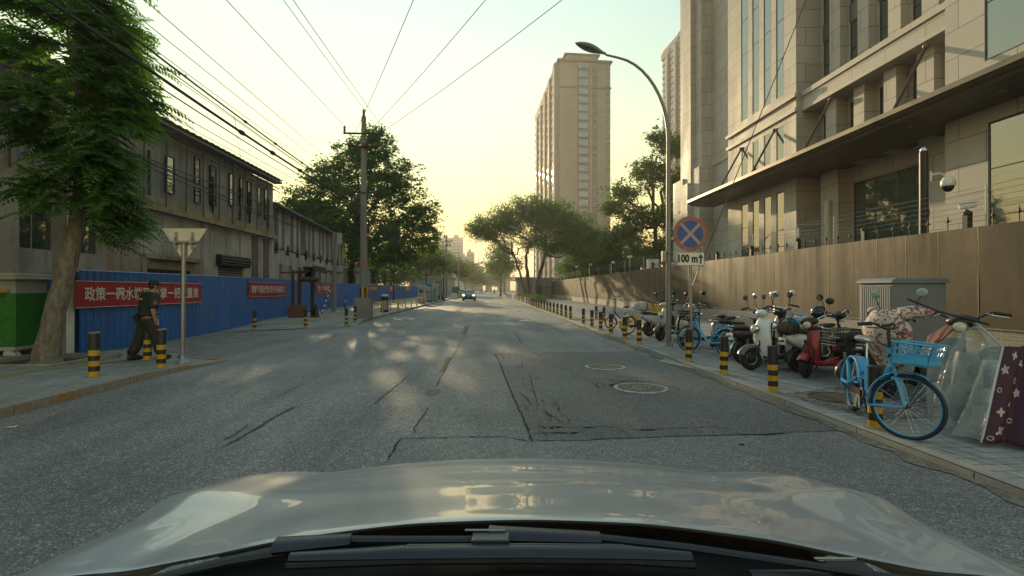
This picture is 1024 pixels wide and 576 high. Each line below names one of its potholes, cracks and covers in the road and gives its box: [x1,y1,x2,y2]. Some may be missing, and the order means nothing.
crack [222,385,300,446]
crack [494,321,726,441]
manhole cover [807,392,866,404]
manhole cover [614,383,668,394]
